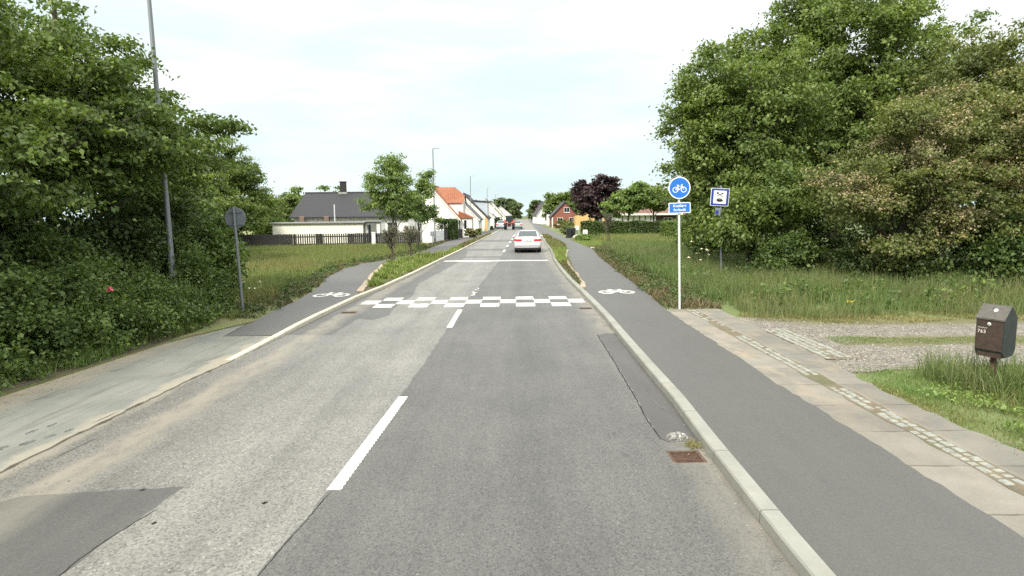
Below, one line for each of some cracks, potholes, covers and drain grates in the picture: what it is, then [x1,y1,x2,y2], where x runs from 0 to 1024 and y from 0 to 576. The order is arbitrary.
drain grate [666,451,707,463]
crack [597,333,686,443]
